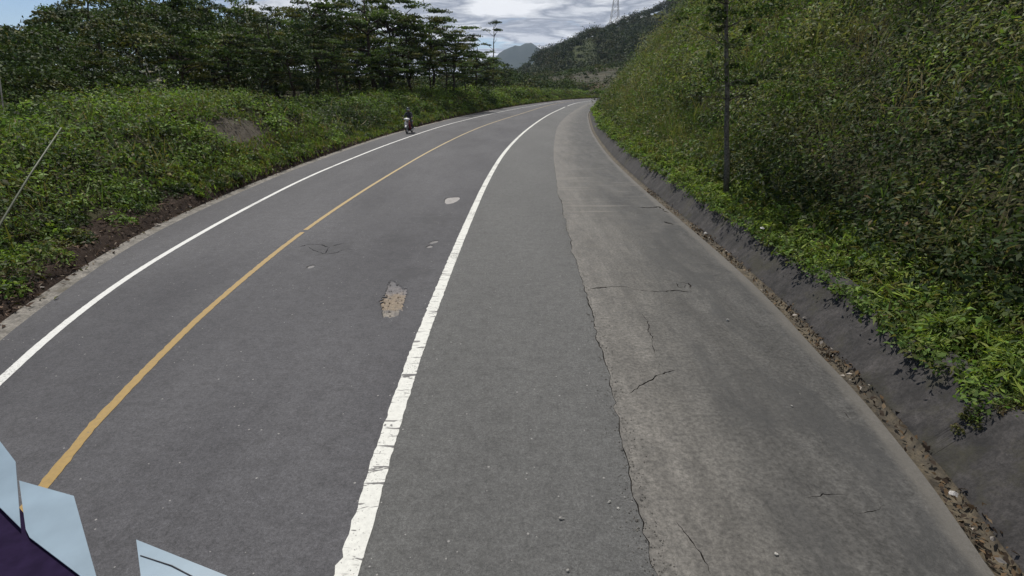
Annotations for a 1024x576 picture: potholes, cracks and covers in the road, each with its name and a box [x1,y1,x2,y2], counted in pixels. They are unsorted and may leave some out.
crack [623,304,675,393]
pothole [377,280,408,319]
crack [553,152,658,576]
